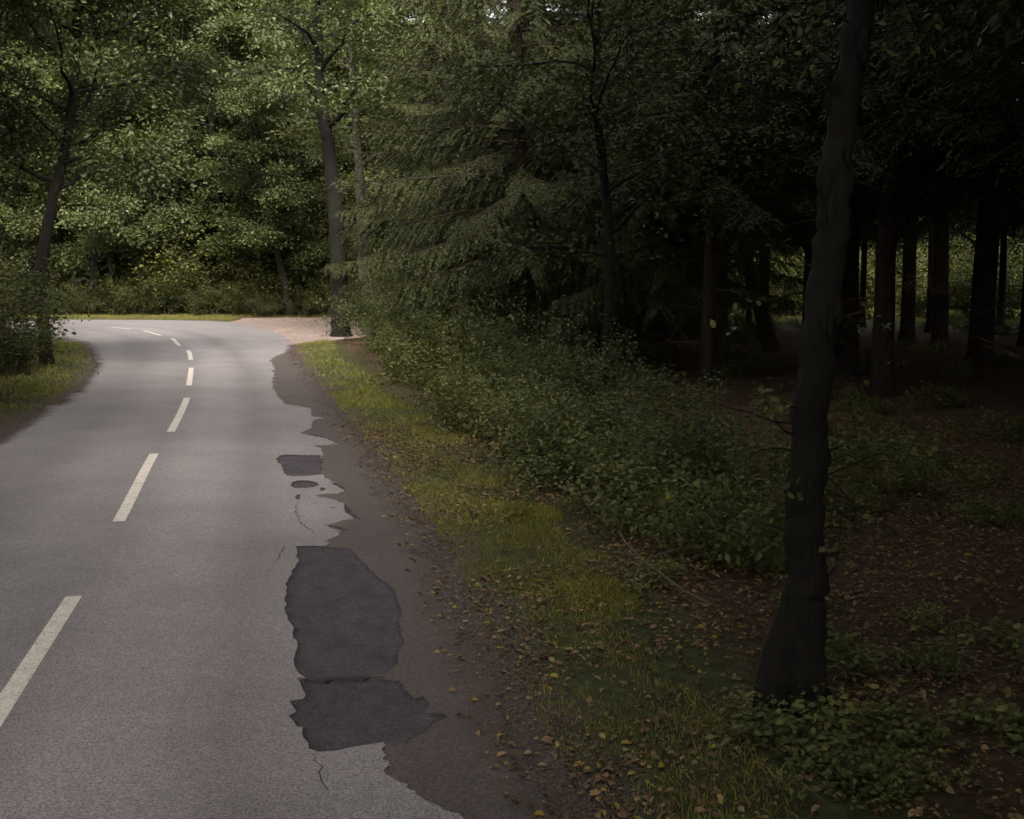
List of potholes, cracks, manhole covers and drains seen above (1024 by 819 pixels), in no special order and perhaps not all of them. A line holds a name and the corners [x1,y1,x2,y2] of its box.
crack [295,482,361,533]
